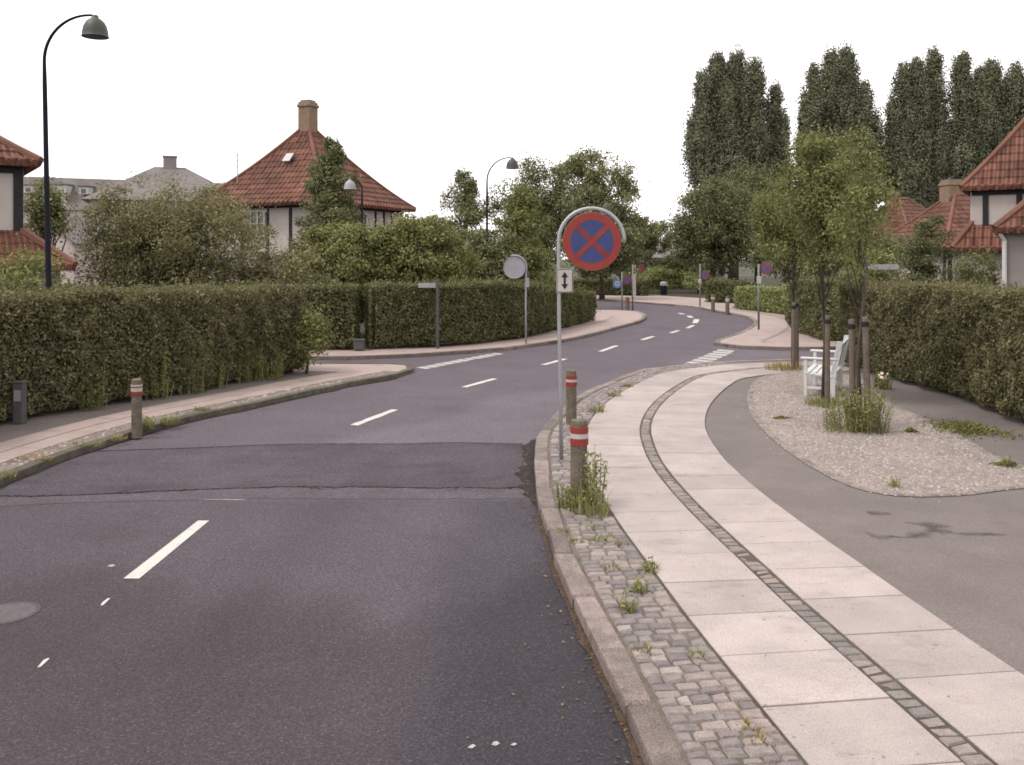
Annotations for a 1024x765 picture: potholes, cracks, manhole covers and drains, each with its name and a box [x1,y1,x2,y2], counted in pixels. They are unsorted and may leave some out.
manhole cover [0,601,42,625]
